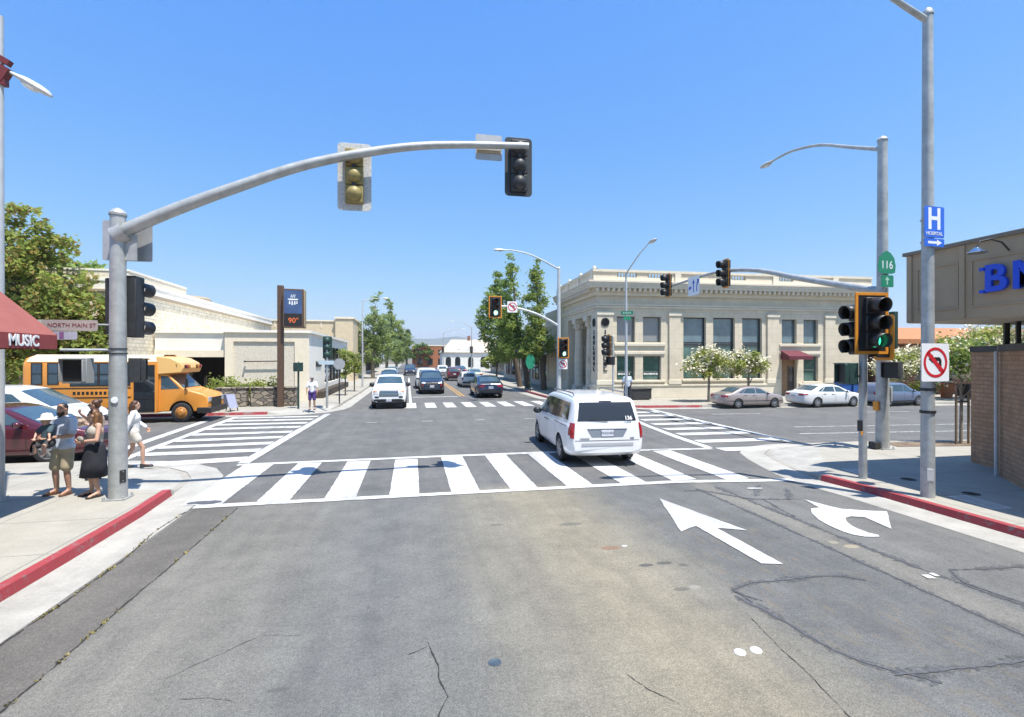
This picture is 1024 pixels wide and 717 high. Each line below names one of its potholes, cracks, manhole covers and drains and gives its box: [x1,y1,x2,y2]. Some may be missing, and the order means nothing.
crack [409,643,448,717]
crack [0,507,238,713]
